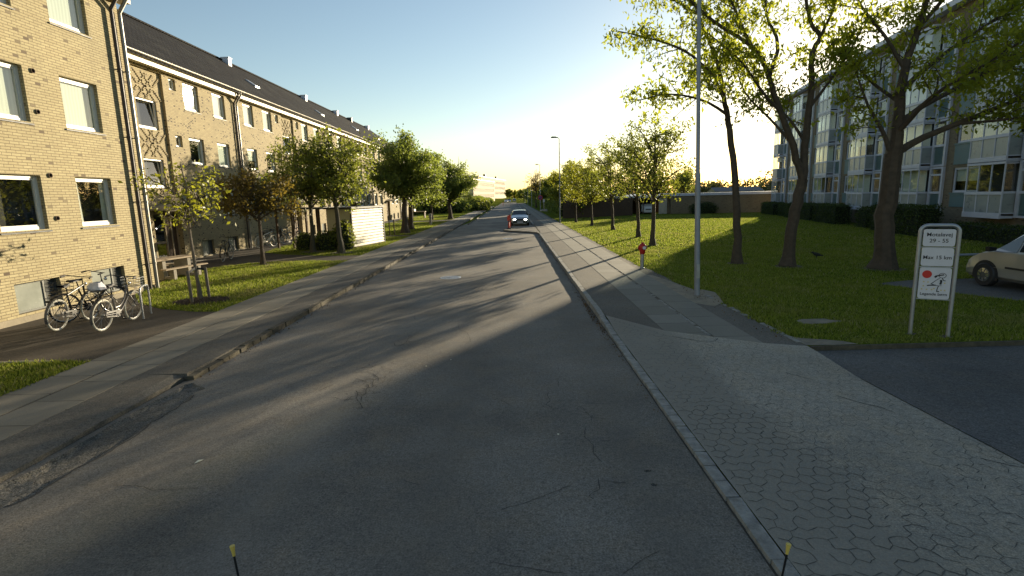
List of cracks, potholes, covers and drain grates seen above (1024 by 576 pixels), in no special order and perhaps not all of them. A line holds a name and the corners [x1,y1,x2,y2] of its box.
crack [321,360,398,408]
